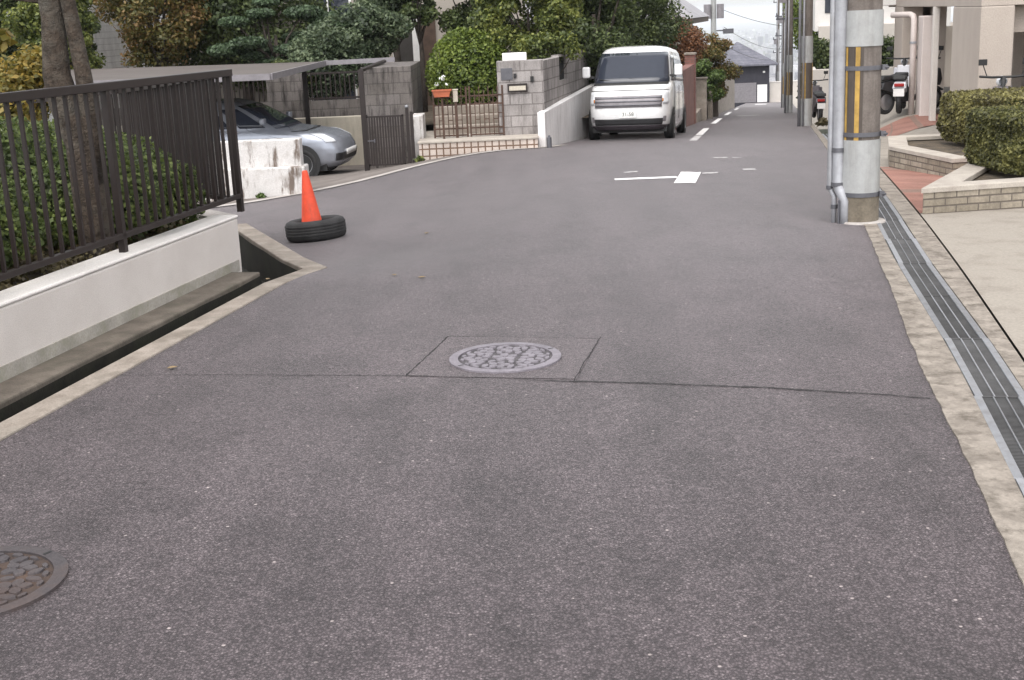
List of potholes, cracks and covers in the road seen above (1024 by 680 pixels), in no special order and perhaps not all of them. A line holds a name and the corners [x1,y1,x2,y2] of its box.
drain grate [974,396,1024,479]
drain grate [897,263,955,295]
manhole cover [0,545,69,616]
drain grate [944,338,1024,397]
manhole cover [449,342,561,374]
drain grate [917,295,987,340]
drain grate [879,204,903,220]
drain grate [885,238,932,263]
drain grate [877,219,914,239]
